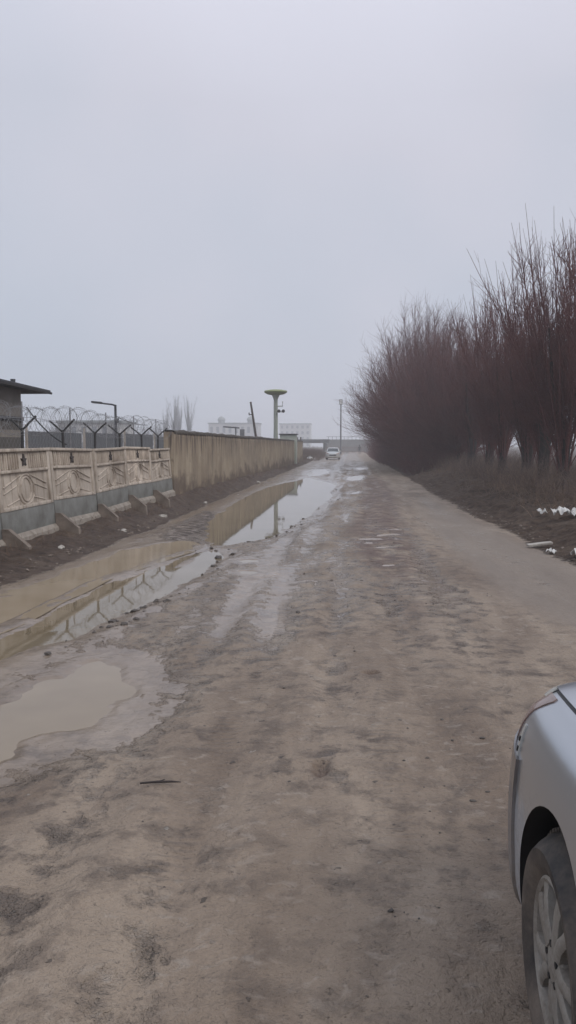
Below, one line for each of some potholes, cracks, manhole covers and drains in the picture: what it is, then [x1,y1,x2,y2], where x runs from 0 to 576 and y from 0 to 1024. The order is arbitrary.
pothole [287,751,355,788]
pothole [0,653,159,777]
